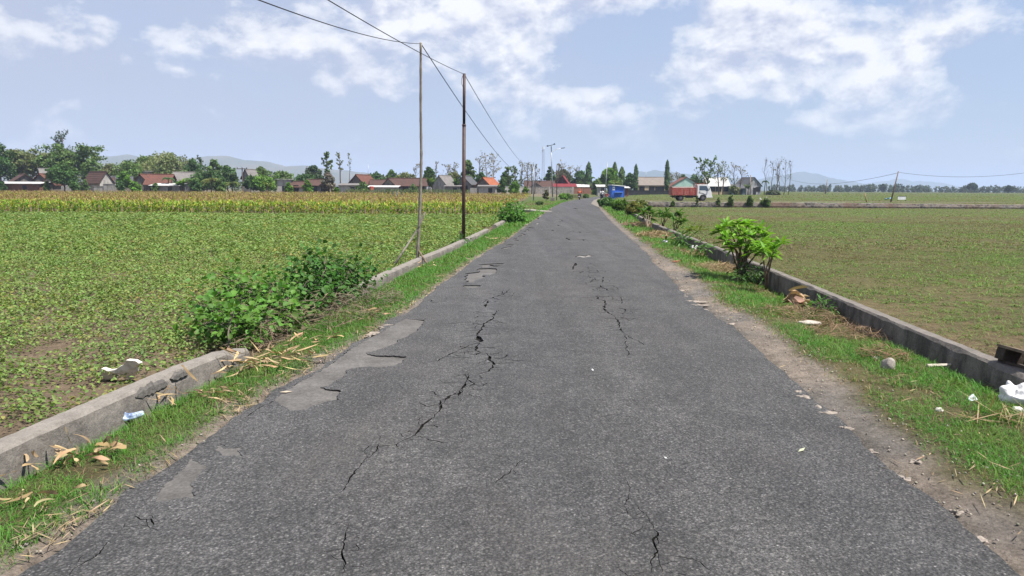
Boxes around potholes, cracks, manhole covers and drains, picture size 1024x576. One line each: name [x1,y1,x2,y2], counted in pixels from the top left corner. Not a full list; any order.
crack [70,444,225,573]
pothole [275,319,424,410]
crack [573,264,644,356]
pothole [156,458,207,502]
crack [316,291,520,571]
crack [609,477,710,576]
pothole [464,268,497,283]
